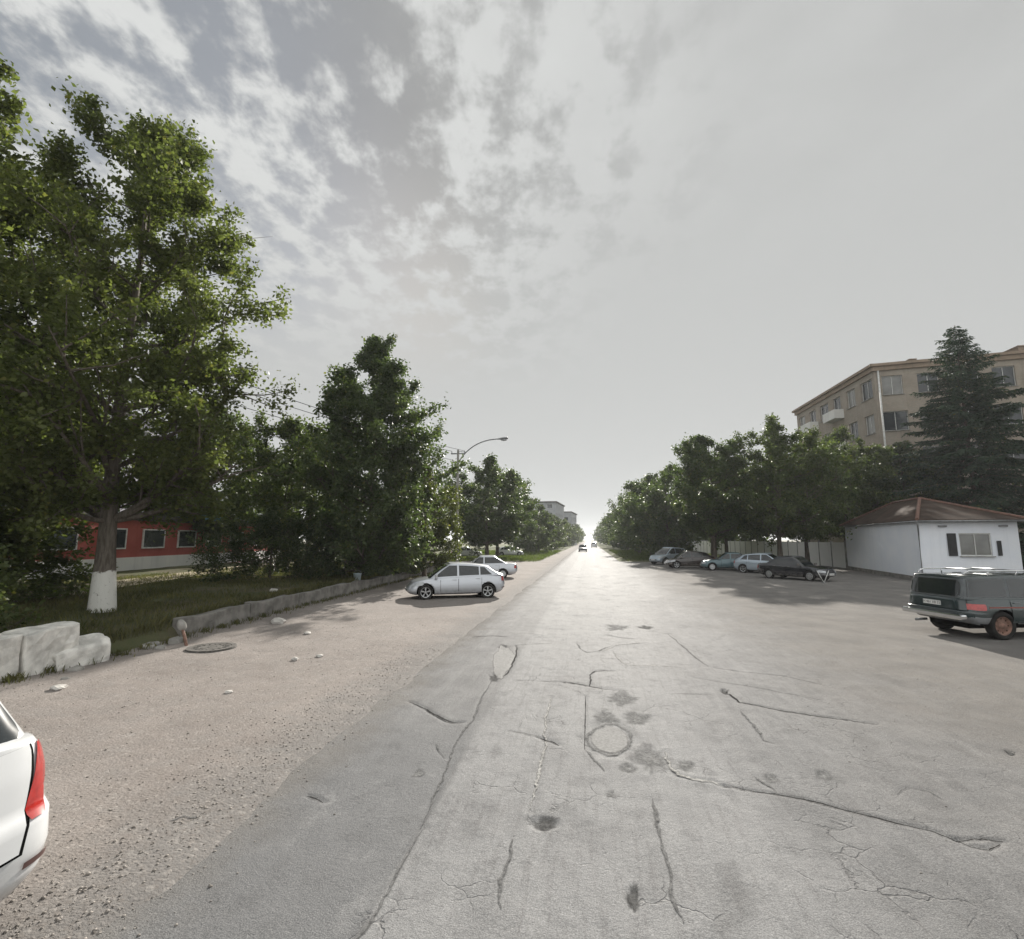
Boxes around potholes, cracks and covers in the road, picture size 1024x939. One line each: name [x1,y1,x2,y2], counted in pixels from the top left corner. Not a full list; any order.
crack [736,776,1003,851]
manhole cover [185,642,237,653]
crack [353,634,878,939]
pothole [627,885,639,911]
pothole [535,818,555,830]
